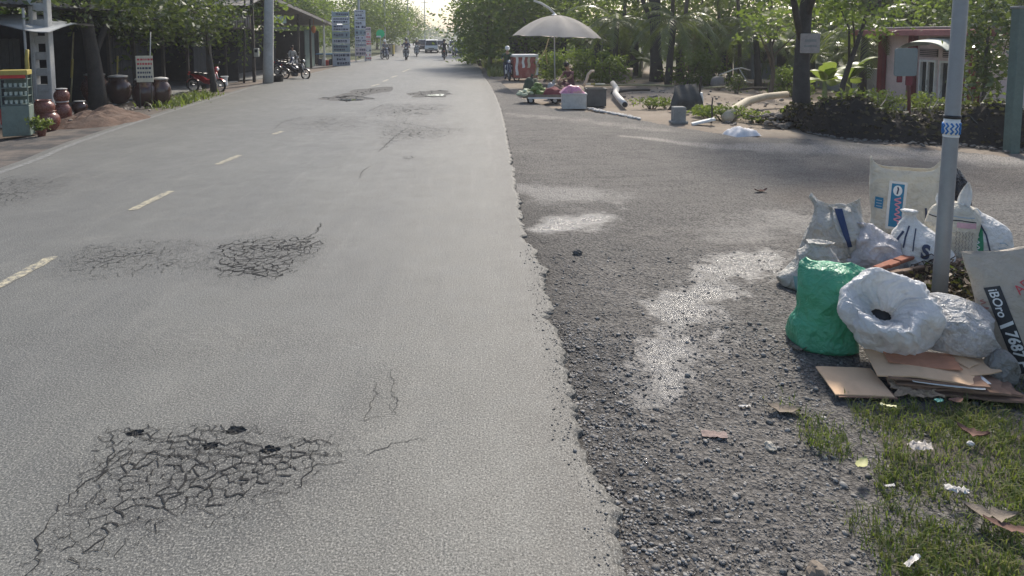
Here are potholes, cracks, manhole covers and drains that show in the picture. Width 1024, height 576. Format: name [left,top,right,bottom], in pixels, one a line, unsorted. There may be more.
pothole [406,90,450,98]
pothole [259,445,281,455]
crack [348,373,427,456]
crack [275,104,464,159]
crack [53,222,324,283]
pothole [332,87,393,97]
pothole [225,426,247,435]
